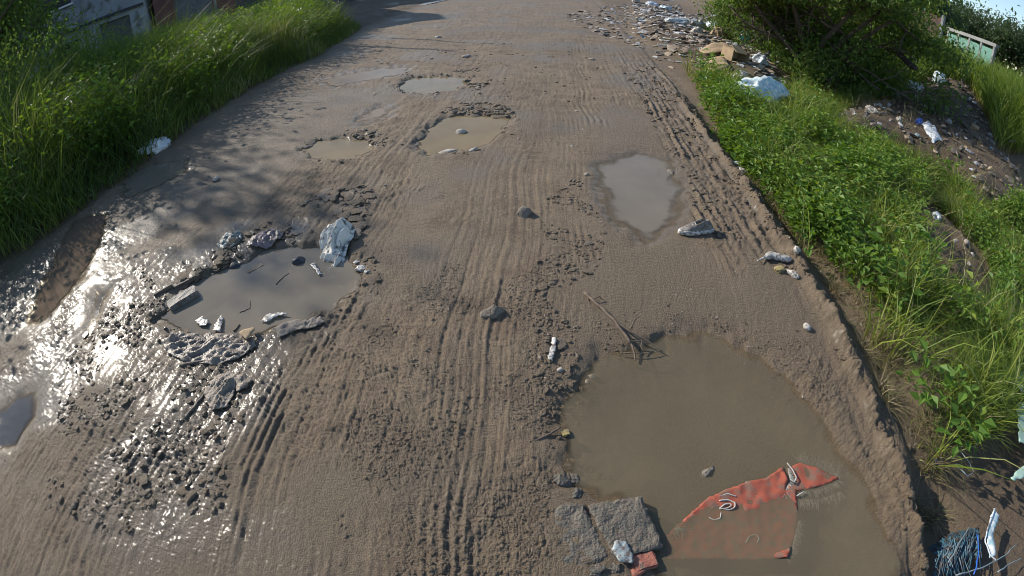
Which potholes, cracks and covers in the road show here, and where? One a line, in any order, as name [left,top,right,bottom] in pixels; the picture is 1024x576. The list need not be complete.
pothole [536,316,909,576]
pothole [405,111,522,158]
pothole [388,73,477,95]
pothole [288,132,386,163]
pothole [144,232,377,349]
